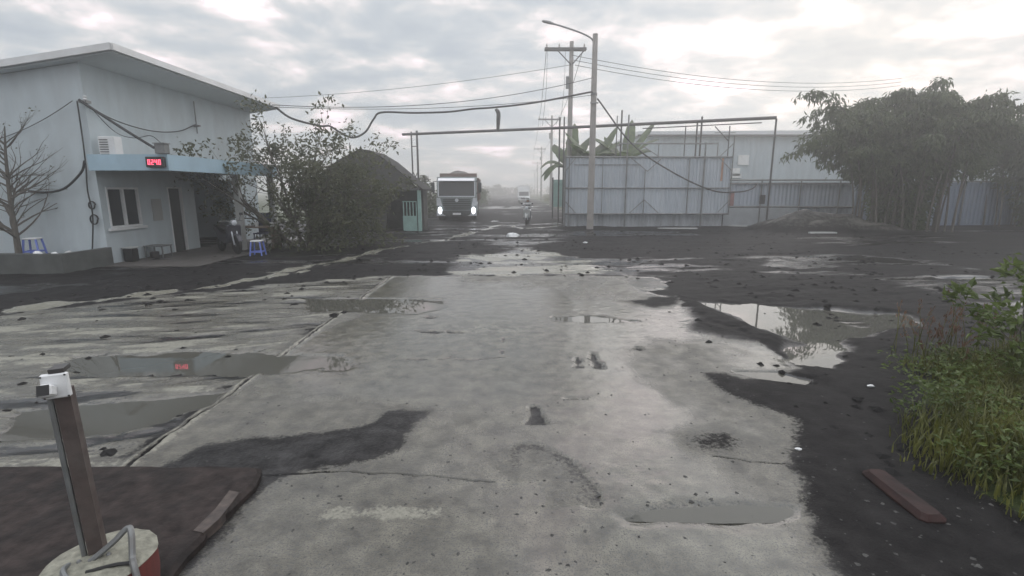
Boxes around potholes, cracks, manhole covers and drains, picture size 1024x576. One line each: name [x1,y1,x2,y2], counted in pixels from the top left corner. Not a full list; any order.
pothole [570,356,586,368]
pothole [586,351,609,370]
pothole [549,314,644,323]
pothole [521,402,556,426]
